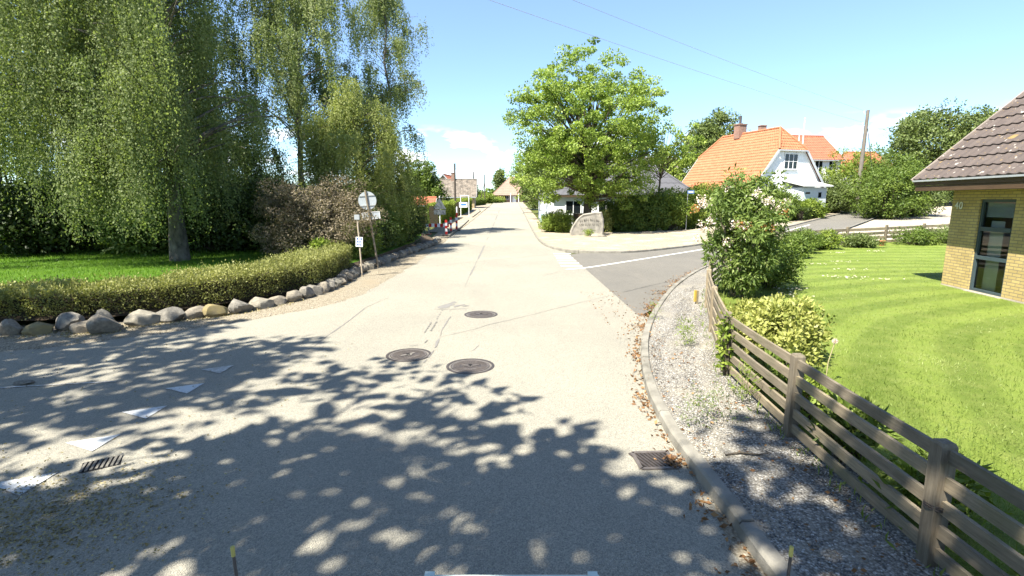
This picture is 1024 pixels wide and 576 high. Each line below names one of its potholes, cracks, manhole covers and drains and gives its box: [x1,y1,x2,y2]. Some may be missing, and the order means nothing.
drain grate [628,450,682,470]
manhole cover [386,348,431,362]
manhole cover [446,358,494,374]
drain grate [79,454,123,473]
